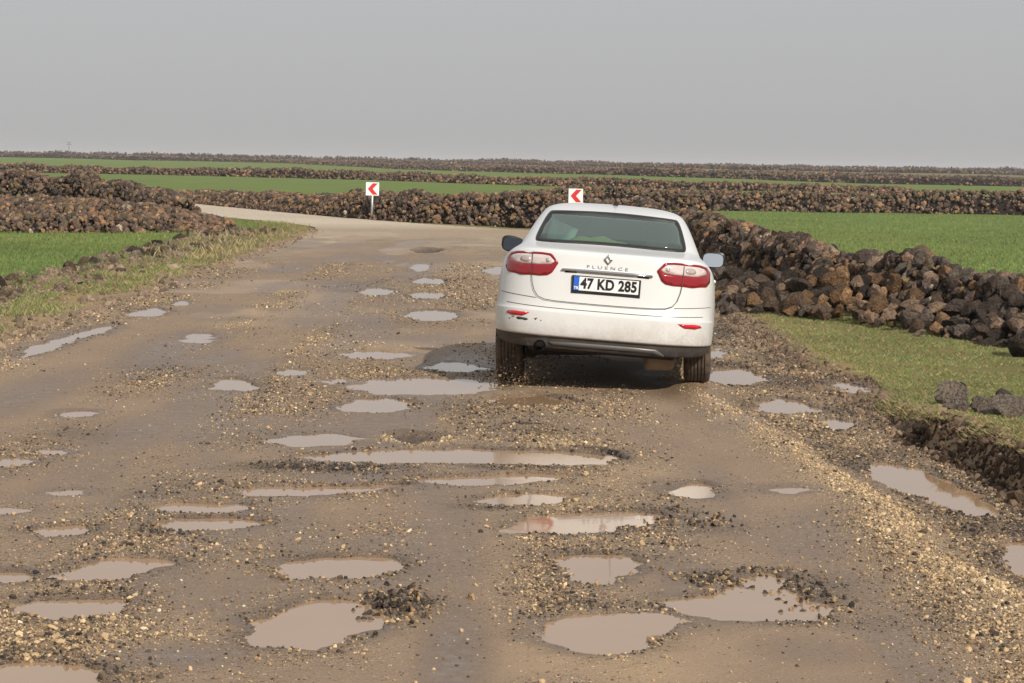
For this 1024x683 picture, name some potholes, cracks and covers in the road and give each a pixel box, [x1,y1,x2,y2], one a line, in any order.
pothole [539,549,656,586]
pothole [341,375,518,396]
pothole [490,508,687,536]
pothole [854,460,1012,517]
pothole [401,308,463,321]
pothole [329,396,425,413]
pothole [0,654,123,683]
pothole [655,479,731,499]
pothole [0,592,145,622]
pothole [228,593,410,651]
pothole [48,550,185,582]
pothole [642,567,847,623]
